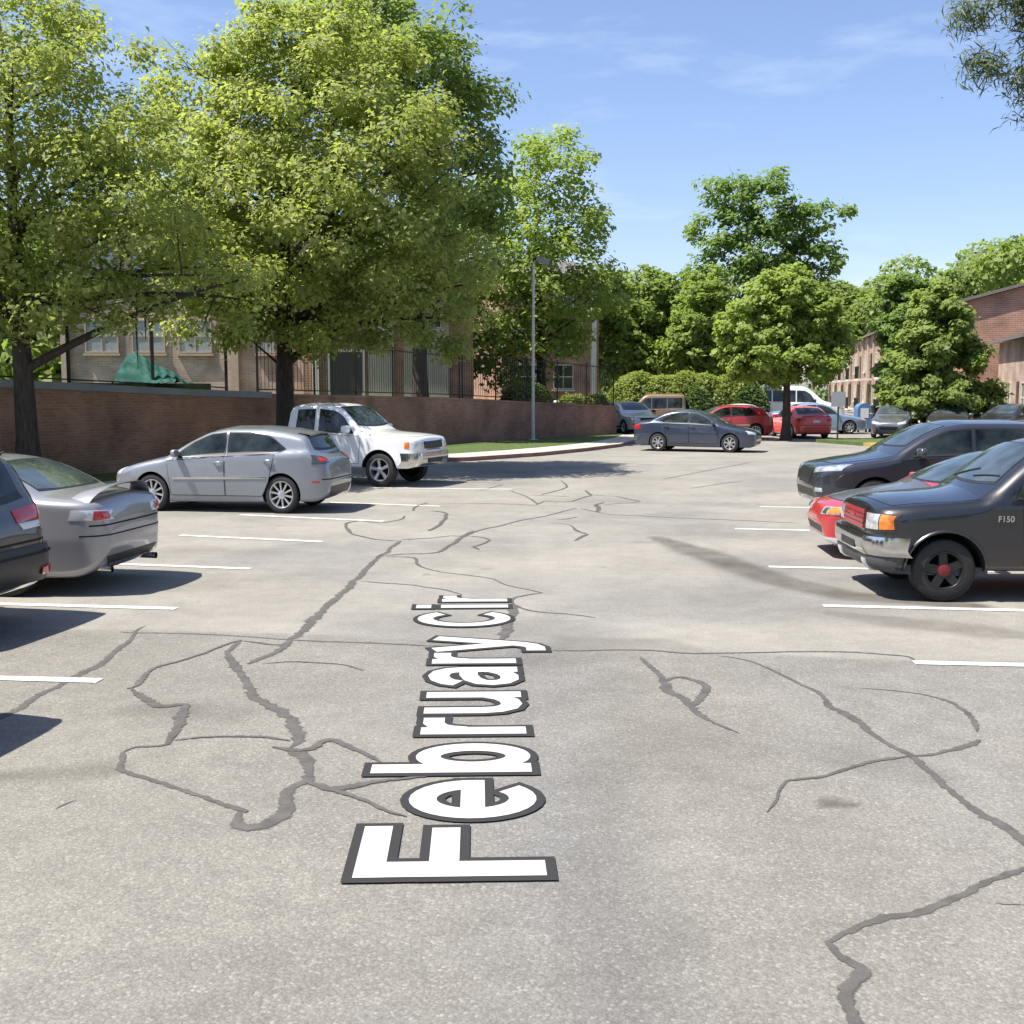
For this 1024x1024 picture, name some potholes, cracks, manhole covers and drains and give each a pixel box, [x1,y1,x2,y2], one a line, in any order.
crack [367,556,596,640]
crack [466,481,788,541]
crack [717,655,1024,845]
